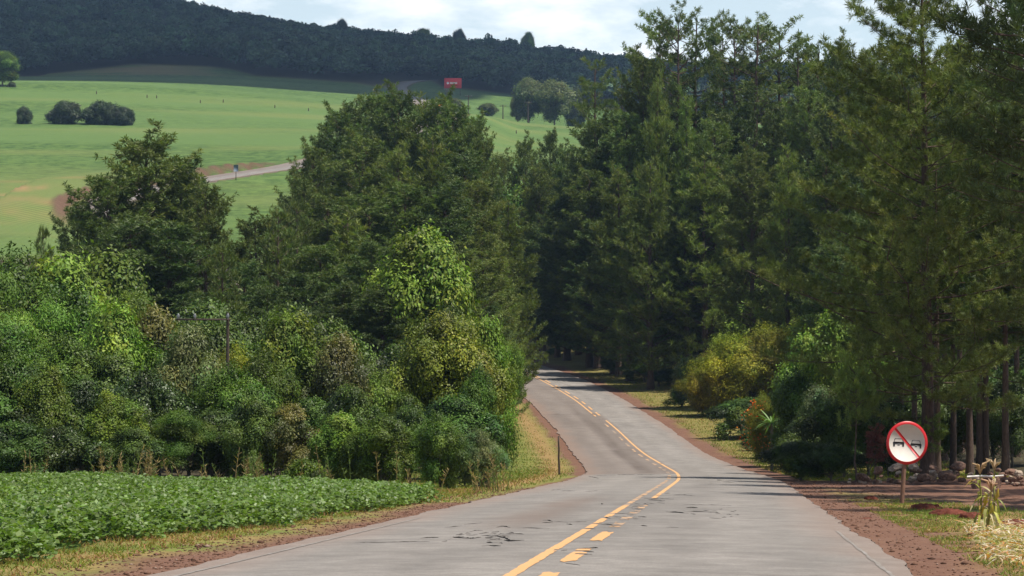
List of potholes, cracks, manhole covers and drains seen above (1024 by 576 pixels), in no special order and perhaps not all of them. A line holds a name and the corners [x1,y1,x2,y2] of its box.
crack [373,523,522,546]
crack [561,493,738,565]
